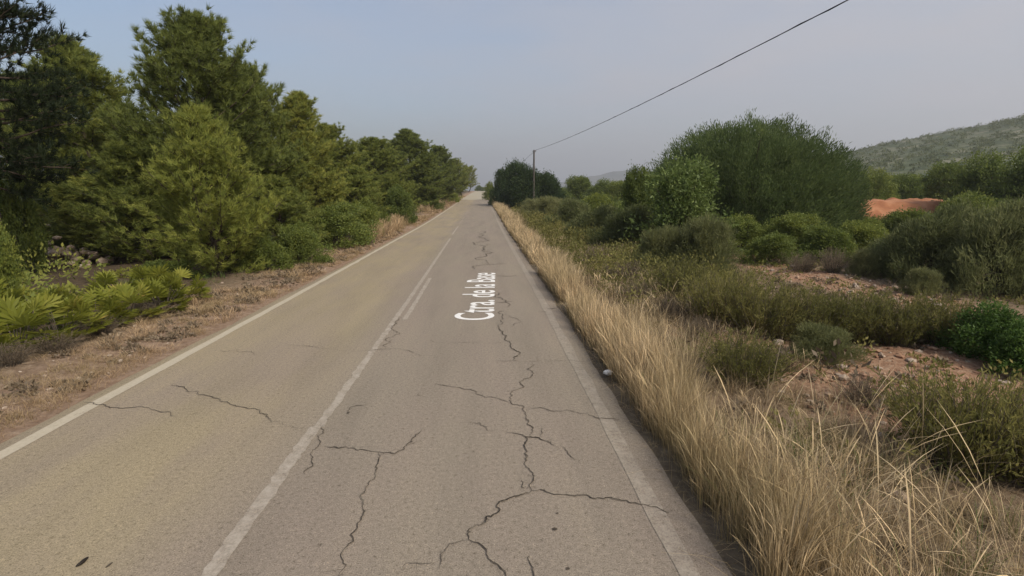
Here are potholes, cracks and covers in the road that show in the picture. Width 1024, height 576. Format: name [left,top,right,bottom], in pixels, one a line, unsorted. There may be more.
crack [83,401,172,416]
crack [172,385,422,576]
crack [402,230,671,576]
